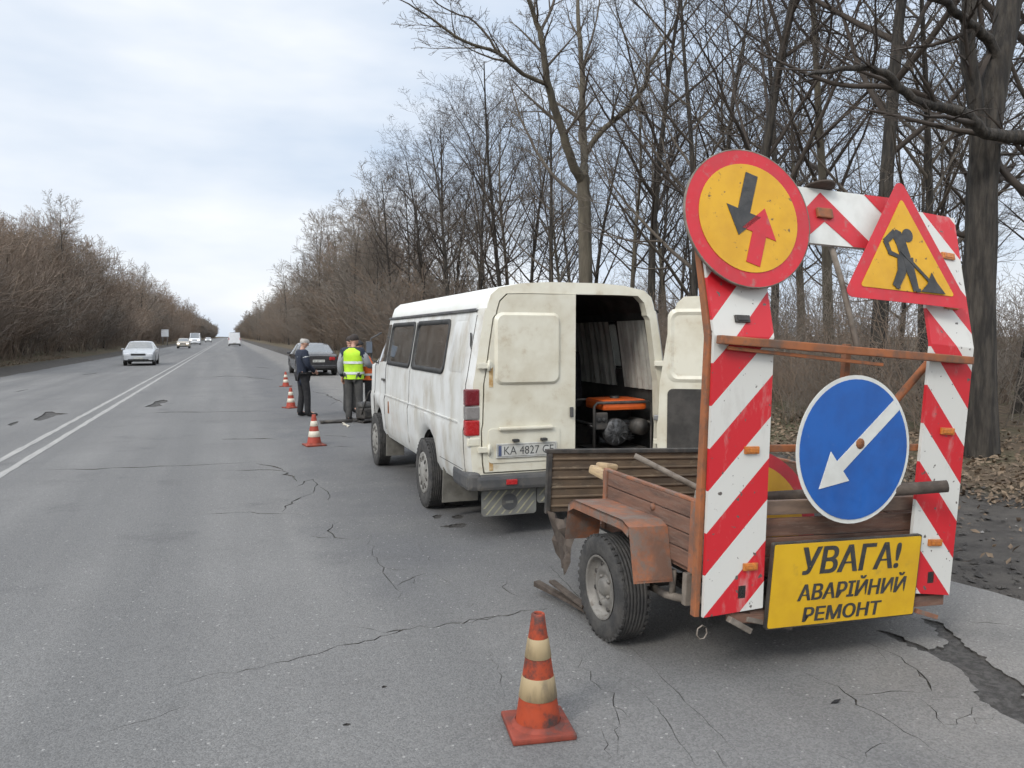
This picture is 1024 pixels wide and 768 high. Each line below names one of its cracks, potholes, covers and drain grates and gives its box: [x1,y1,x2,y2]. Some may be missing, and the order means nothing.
crack [176,579,567,686]
crack [578,656,637,758]
crack [802,642,994,768]
crack [56,462,330,515]
pothole [878,618,1024,724]
pothole [34,412,65,421]
crack [312,521,455,604]
